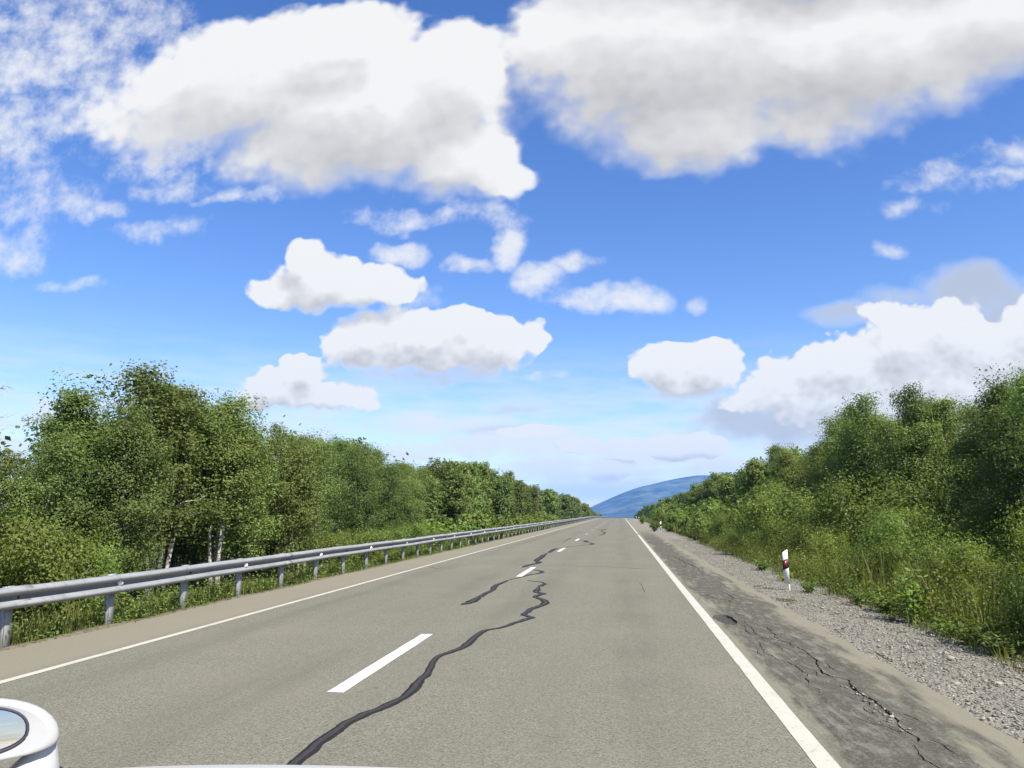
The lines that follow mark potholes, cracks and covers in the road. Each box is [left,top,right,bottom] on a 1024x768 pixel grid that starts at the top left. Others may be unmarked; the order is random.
crack [730,609,972,768]
pothole [713,615,737,625]
